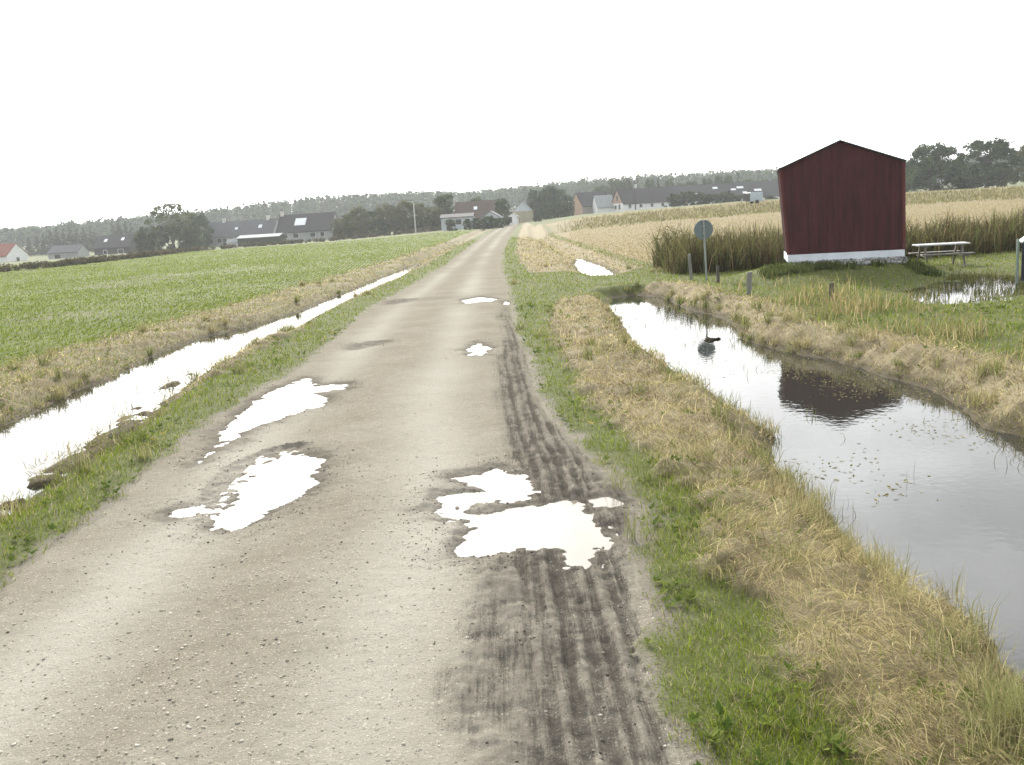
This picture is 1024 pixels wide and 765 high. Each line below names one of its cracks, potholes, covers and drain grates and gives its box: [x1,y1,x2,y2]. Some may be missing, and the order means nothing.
pothole [154,501,219,523]
pothole [457,339,498,356]
pothole [458,296,503,304]
pothole [192,441,338,535]
pothole [409,461,629,574]
pothole [183,376,358,466]
